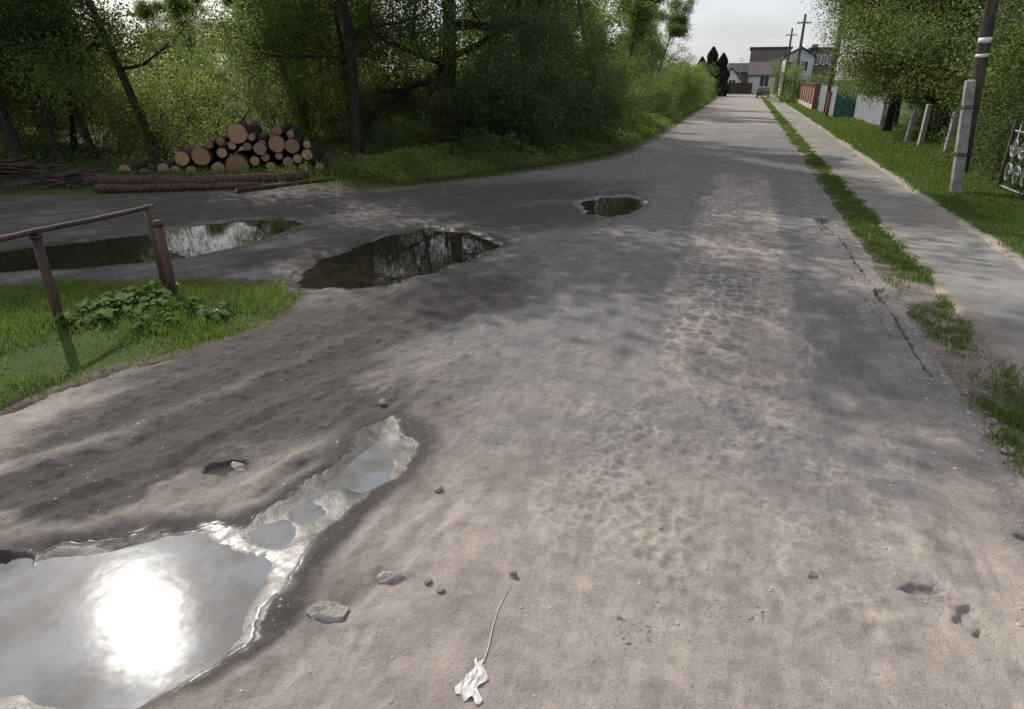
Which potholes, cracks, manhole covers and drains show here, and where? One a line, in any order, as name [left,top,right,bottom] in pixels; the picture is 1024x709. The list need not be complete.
crack [815,213,938,381]
pothole [236,414,420,553]
pothole [0,523,315,709]
pothole [573,195,655,218]
pothole [939,595,992,639]
pothole [287,226,510,292]
pothole [0,217,307,273]
pothole [189,456,258,481]
